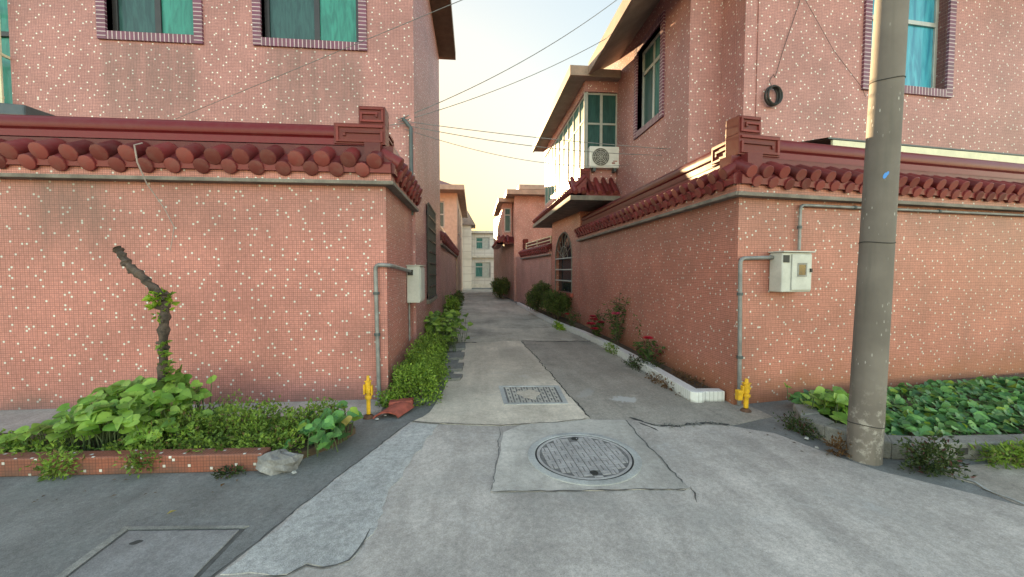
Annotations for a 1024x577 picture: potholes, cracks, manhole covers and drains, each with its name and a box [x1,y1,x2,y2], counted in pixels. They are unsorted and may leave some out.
manhole cover [528,432,642,486]
crack [490,417,729,502]
manhole cover [56,525,249,577]
